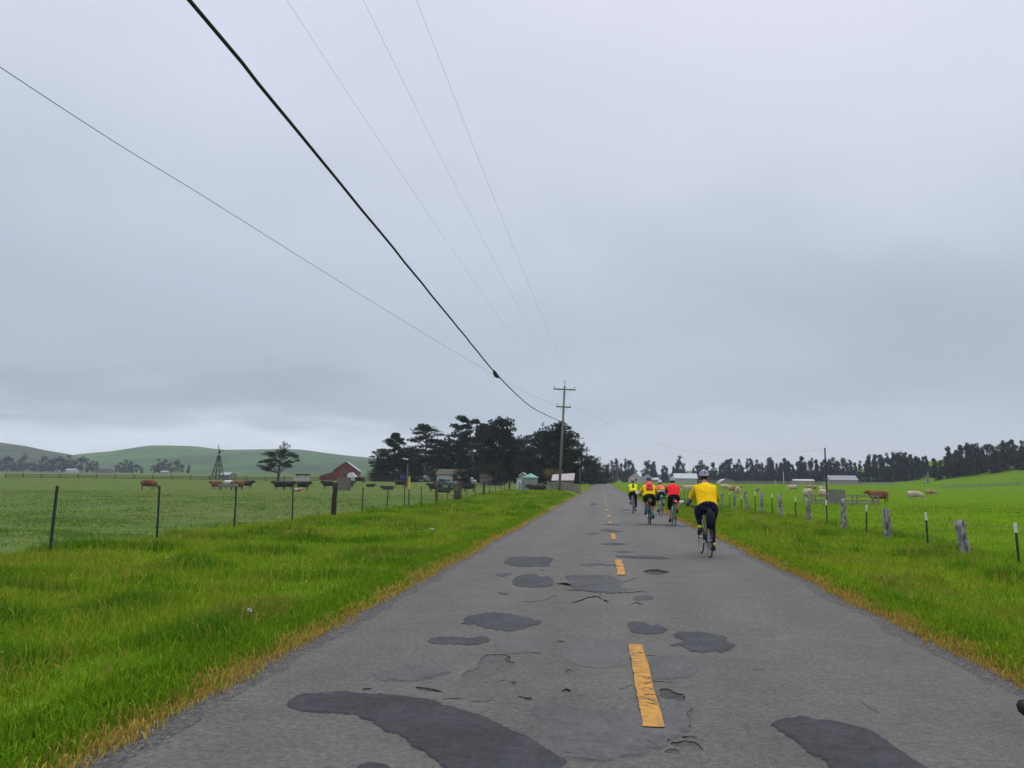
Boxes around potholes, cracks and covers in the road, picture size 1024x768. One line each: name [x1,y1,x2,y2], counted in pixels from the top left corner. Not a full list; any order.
crack [523,578,645,605]
pothole [659,689,686,701]
